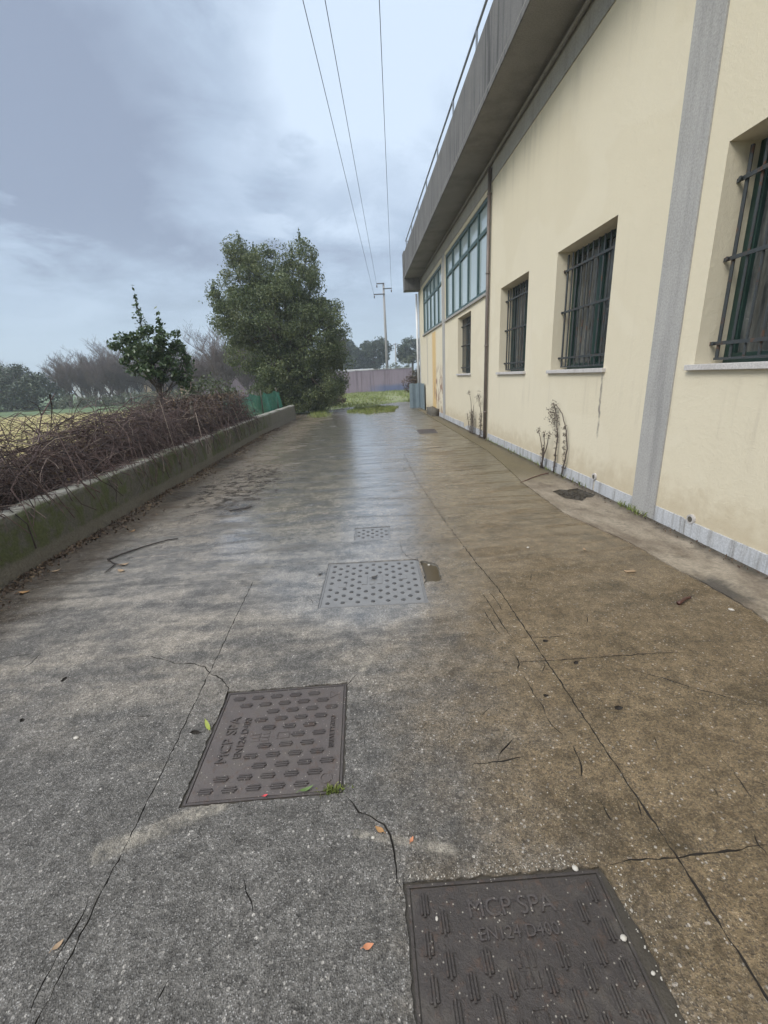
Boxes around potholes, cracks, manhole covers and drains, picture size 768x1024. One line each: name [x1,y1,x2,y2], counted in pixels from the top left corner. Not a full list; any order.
crack [463,739,520,766]
crack [482,582,588,638]
crack [111,656,229,714]
crack [498,652,764,821]
manhole cover [180,683,348,808]
crack [347,797,401,887]
manhole cover [354,527,391,541]
manhole cover [318,560,428,609]
crack [28,903,88,1018]
manhole cover [403,867,687,1024]
crack [610,835,768,865]
